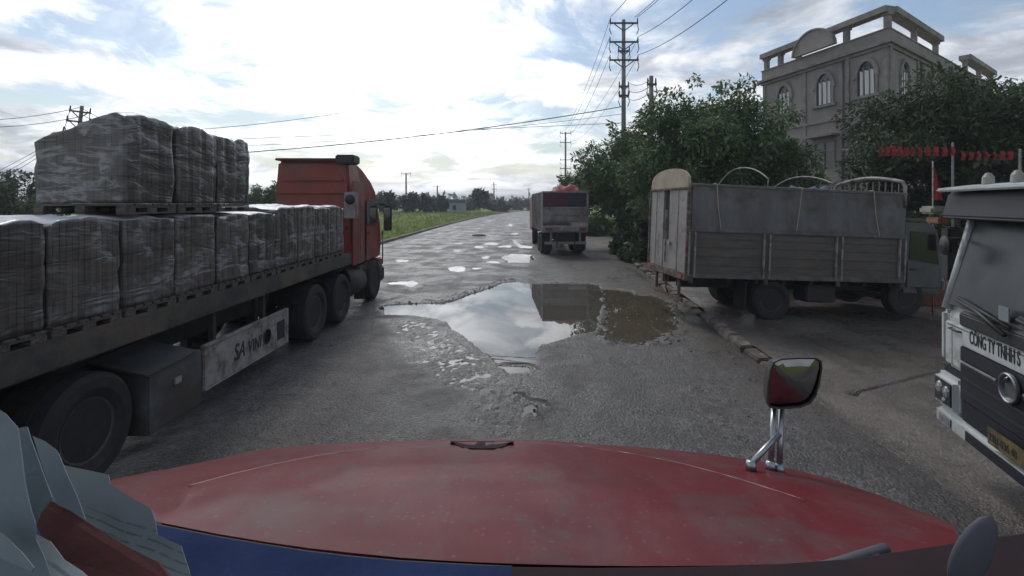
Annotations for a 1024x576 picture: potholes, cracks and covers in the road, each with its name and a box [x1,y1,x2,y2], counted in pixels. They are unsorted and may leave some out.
pothole [589,287,695,349]
pothole [508,239,537,249]
crack [846,370,941,397]
pothole [496,253,540,263]
